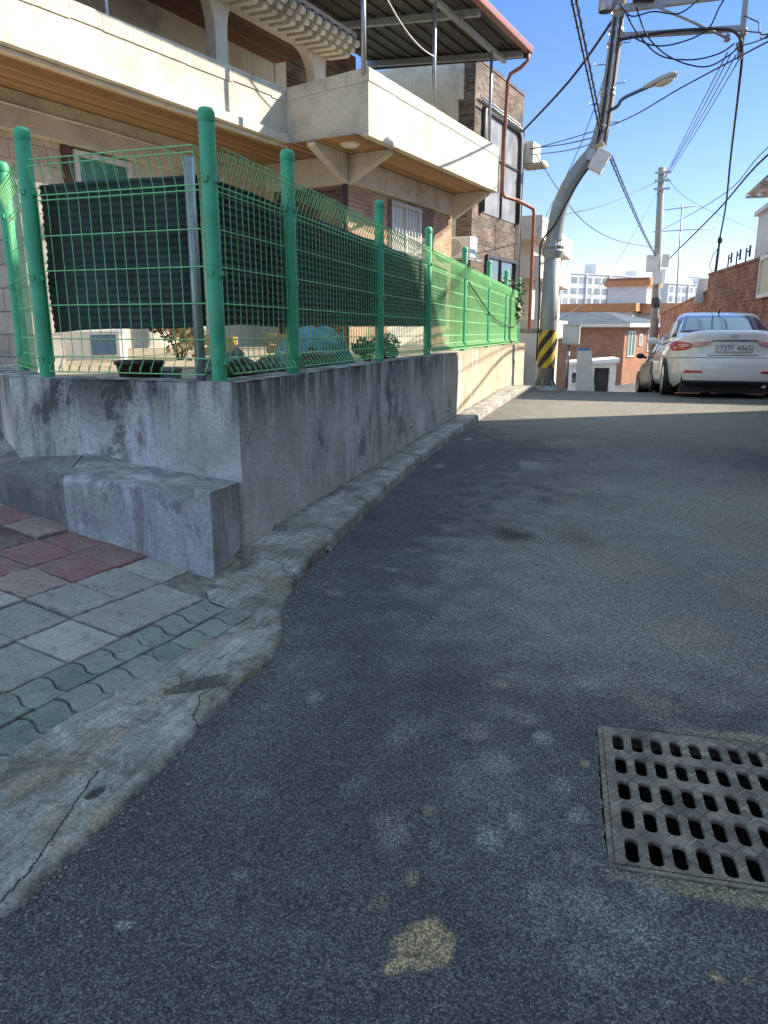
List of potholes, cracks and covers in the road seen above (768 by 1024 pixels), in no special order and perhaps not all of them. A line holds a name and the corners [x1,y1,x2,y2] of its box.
crack [167,675,216,726]
pothole [84,786,105,800]
crack [0,770,100,903]
pothole [163,673,235,695]
drain grate [597,725,768,894]
